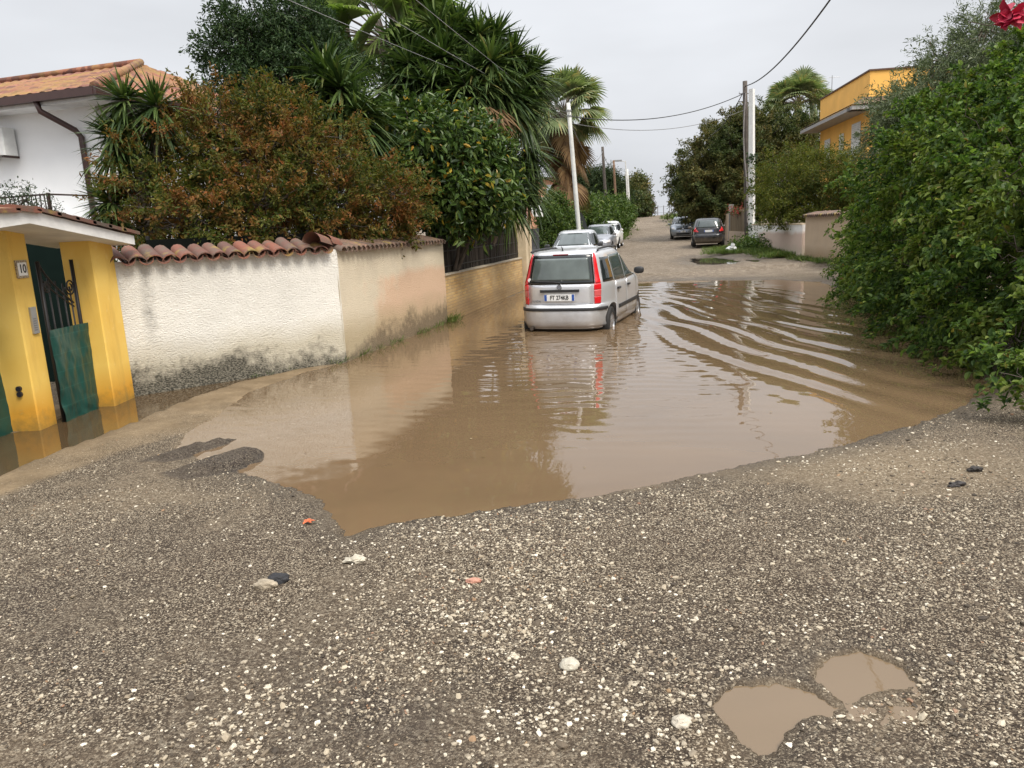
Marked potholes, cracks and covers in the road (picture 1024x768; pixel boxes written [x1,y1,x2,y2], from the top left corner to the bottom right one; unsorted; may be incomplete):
pothole [167,279,999,540]
pothole [697,670,857,767]
pothole [799,642,949,739]
pothole [674,255,754,266]
